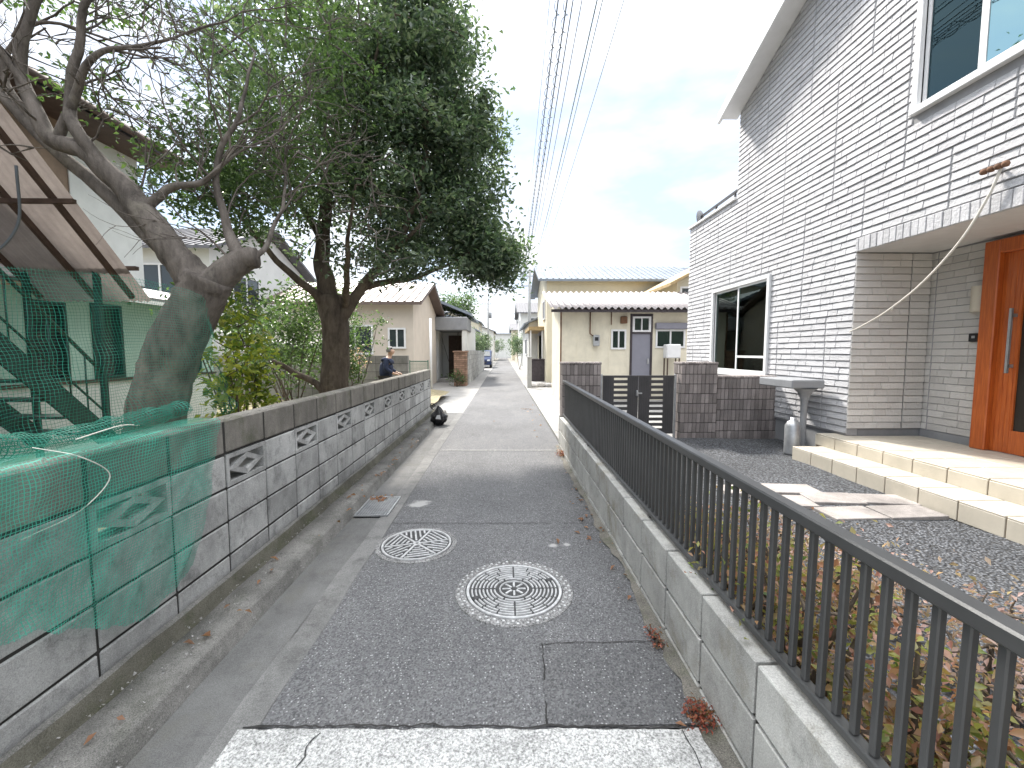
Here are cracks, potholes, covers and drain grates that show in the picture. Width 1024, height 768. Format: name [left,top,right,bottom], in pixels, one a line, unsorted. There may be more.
manhole cover [455,561,573,628]
manhole cover [375,527,457,564]
drain grate [354,496,401,518]
